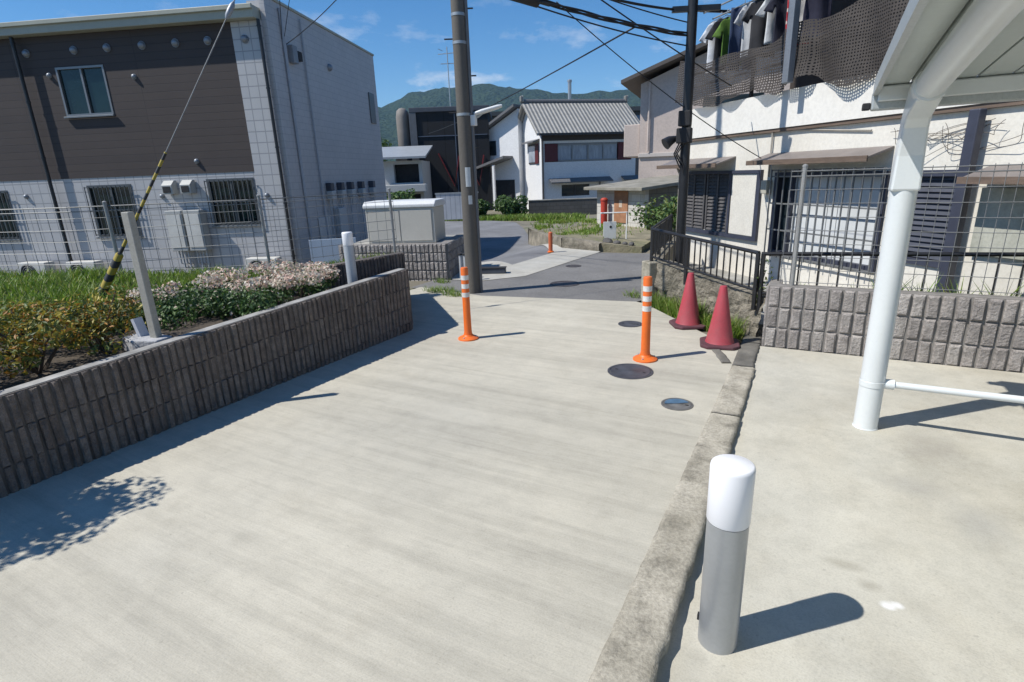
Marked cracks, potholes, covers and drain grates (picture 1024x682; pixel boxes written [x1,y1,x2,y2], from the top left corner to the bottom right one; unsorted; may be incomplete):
manhole cover [607,363,653,379]
manhole cover [661,398,693,411]
